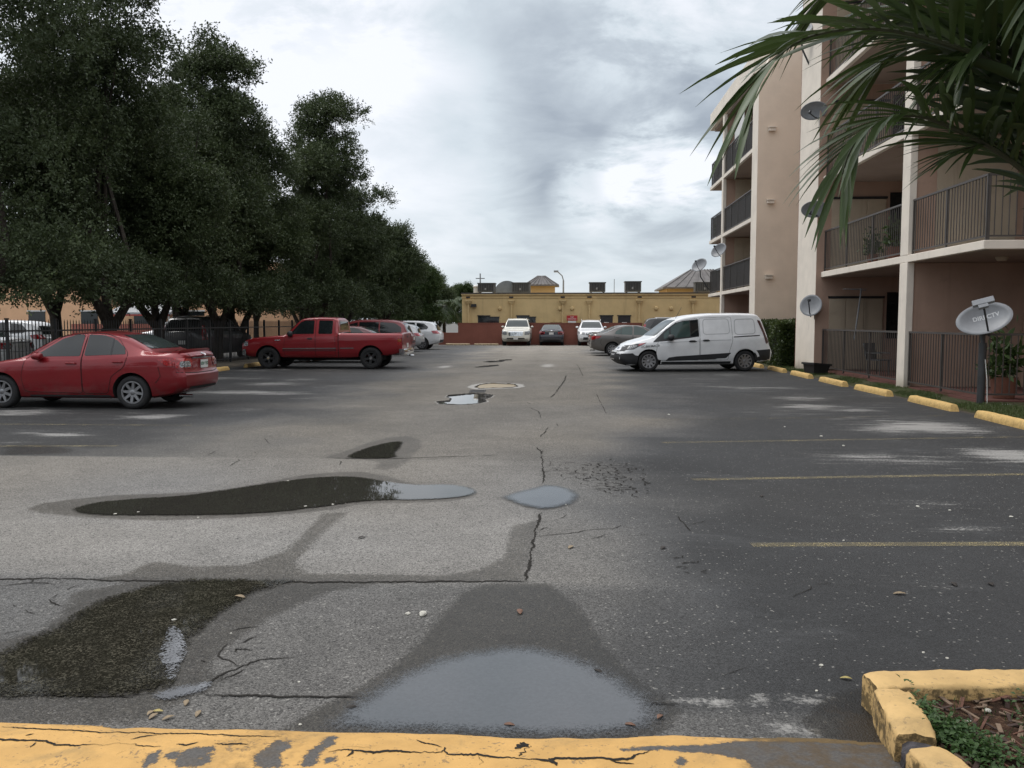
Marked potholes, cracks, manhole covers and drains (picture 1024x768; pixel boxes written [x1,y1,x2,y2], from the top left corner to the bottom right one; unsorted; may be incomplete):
pothole [436,393,493,405]
crack [0,626,677,704]
crack [1,577,521,634]
crack [541,516,705,539]
crack [527,368,651,497]
